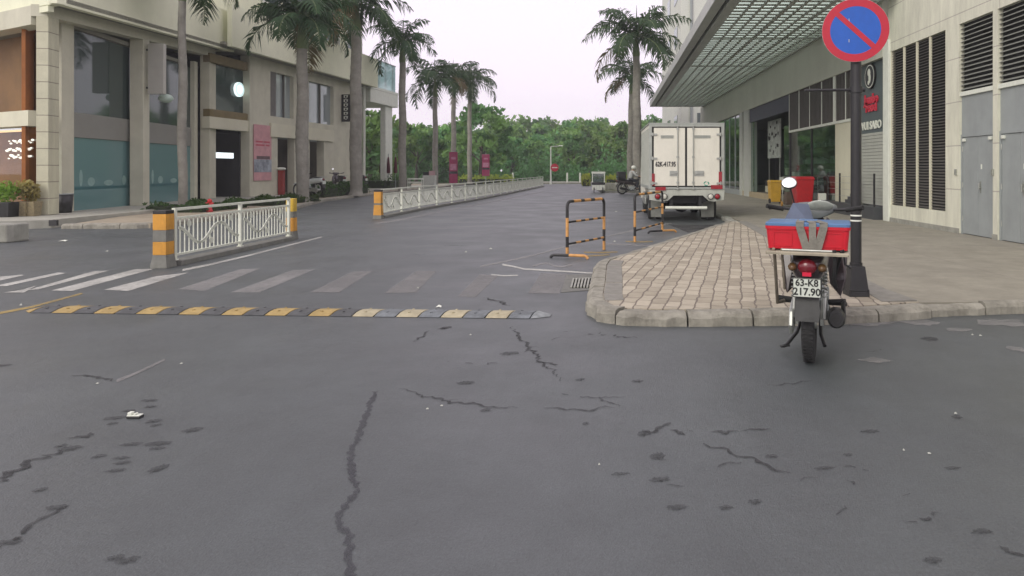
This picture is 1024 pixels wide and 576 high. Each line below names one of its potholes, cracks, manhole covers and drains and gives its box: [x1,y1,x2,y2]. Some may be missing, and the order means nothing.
crack [0,505,68,547]
crack [510,327,625,411]
crack [399,388,518,408]
drain grate [561,274,592,293]
crack [2,433,90,481]
crack [646,422,790,473]
